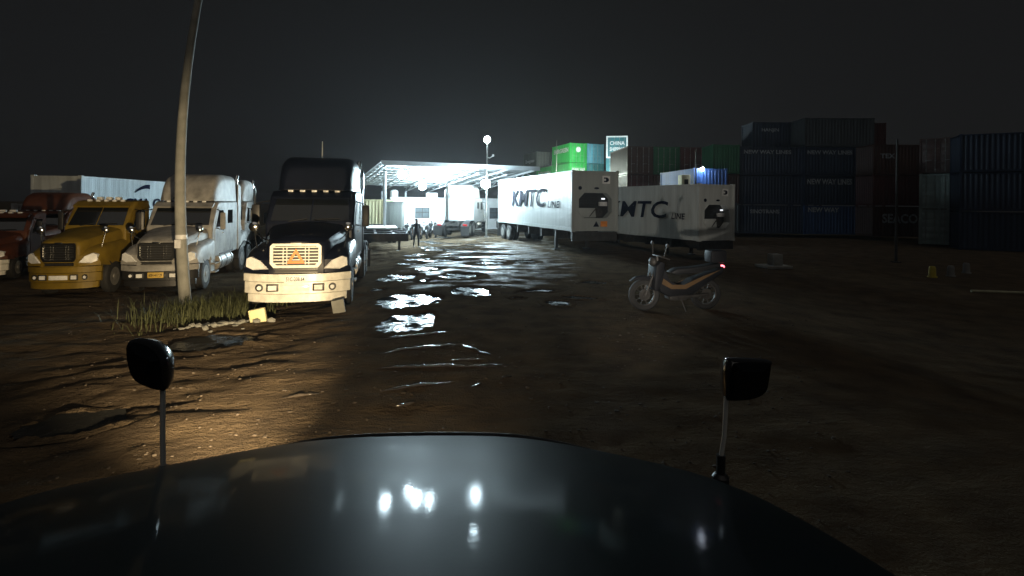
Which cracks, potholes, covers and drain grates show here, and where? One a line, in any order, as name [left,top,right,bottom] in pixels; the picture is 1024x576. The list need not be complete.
pothole [167,330,283,357]
pothole [360,291,459,313]
pothole [362,308,452,338]
pothole [0,403,158,448]
pothole [441,285,501,299]
